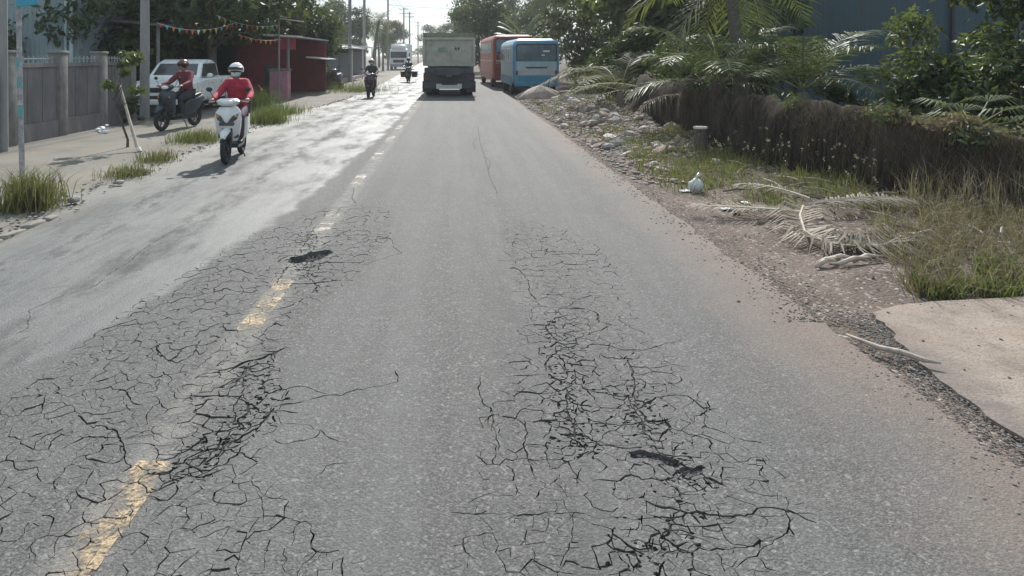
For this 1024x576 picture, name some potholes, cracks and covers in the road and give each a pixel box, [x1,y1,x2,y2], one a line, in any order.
pothole [679,465,706,480]
pothole [628,450,679,467]
crack [448,221,819,576]
crack [0,188,402,576]
pothole [288,250,333,264]
